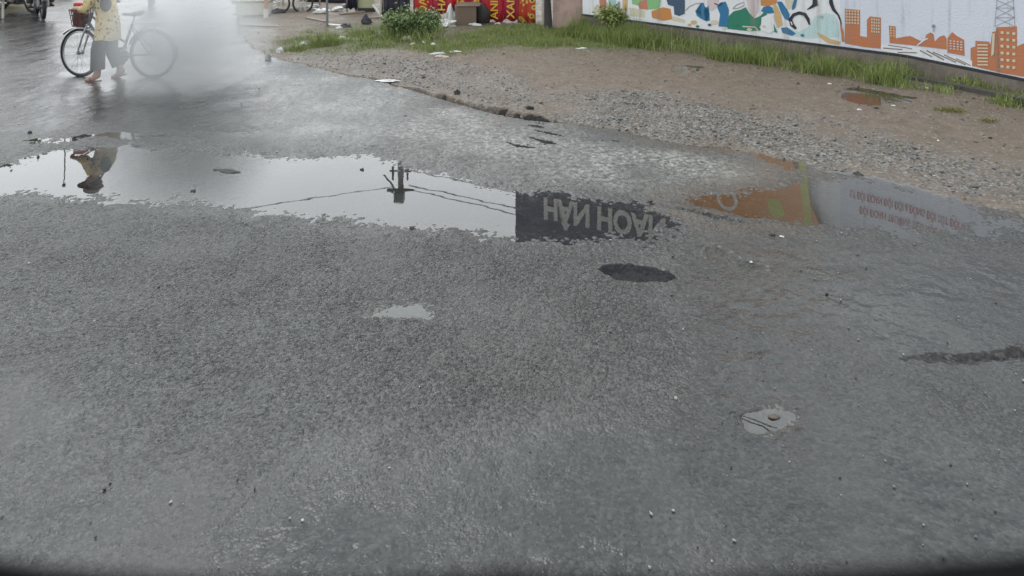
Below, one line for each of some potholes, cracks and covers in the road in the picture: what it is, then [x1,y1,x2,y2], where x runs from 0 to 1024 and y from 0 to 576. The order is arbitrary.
crack [382,82,619,148]
